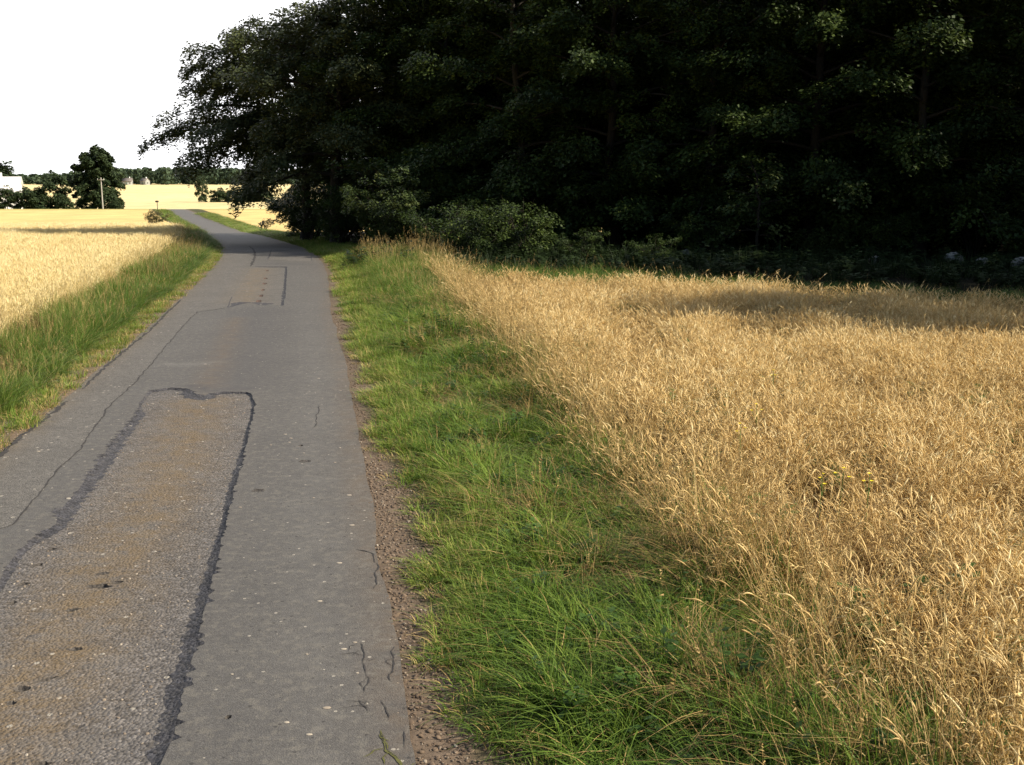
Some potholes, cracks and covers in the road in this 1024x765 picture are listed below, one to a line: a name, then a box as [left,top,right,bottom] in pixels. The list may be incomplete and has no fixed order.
crack [341,643,414,765]
